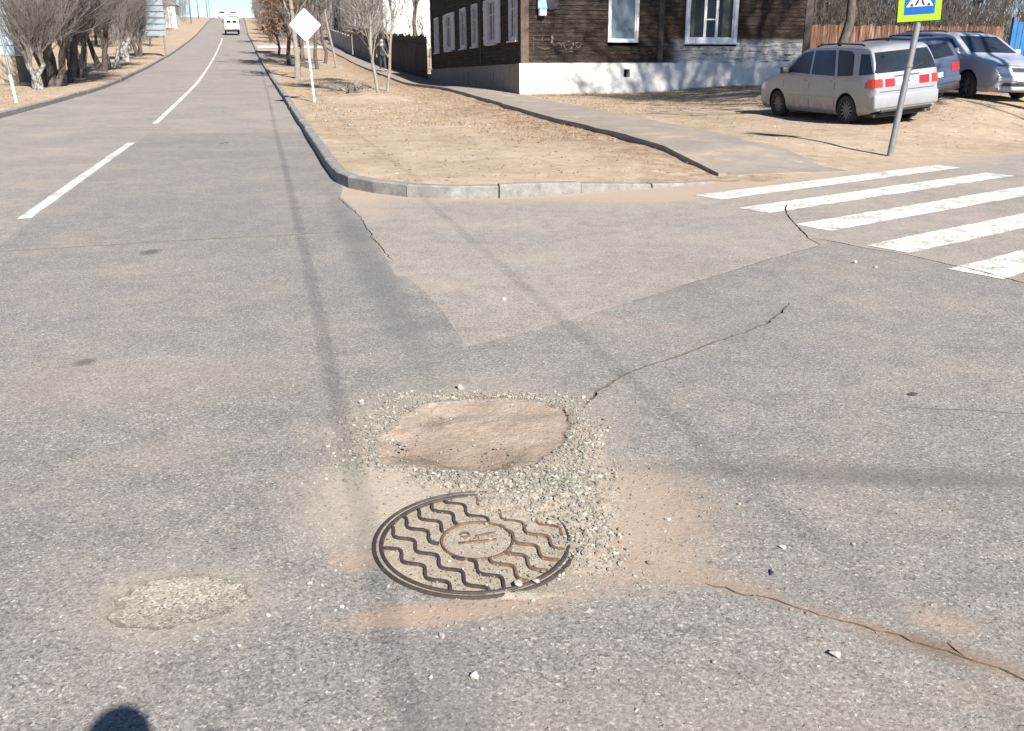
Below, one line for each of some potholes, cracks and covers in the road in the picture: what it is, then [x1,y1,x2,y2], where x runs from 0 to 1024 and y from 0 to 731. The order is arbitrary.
pothole [376,398,572,473]
manhole cover [372,491,575,600]
crack [705,583,1024,681]
crack [585,303,789,405]
